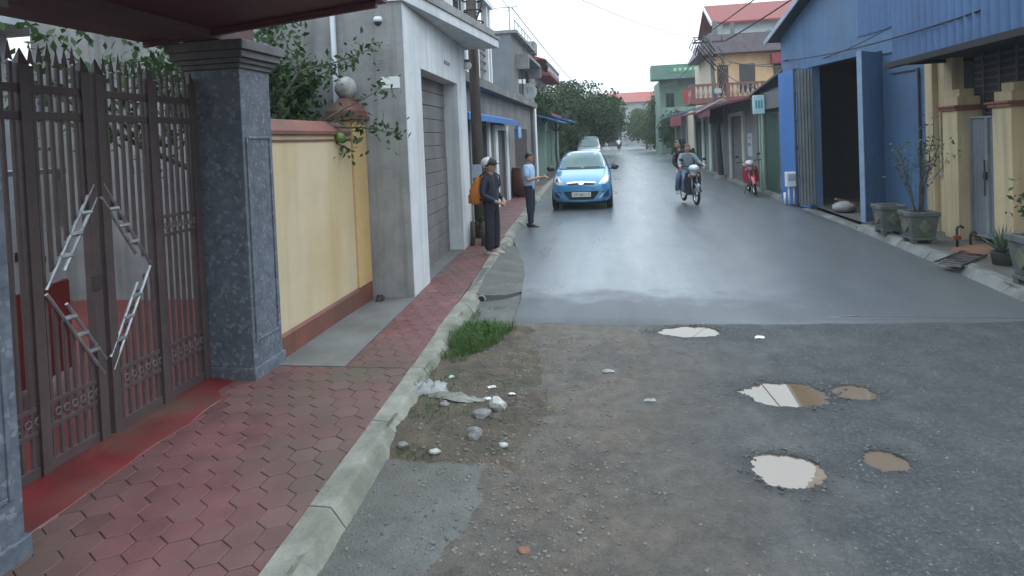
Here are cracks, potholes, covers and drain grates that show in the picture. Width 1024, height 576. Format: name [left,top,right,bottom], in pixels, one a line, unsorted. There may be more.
pothole [715,378,855,421]
pothole [639,323,738,339]
pothole [738,445,845,502]
pothole [817,381,892,404]
pothole [851,444,921,476]
drain grate [934,250,988,267]
